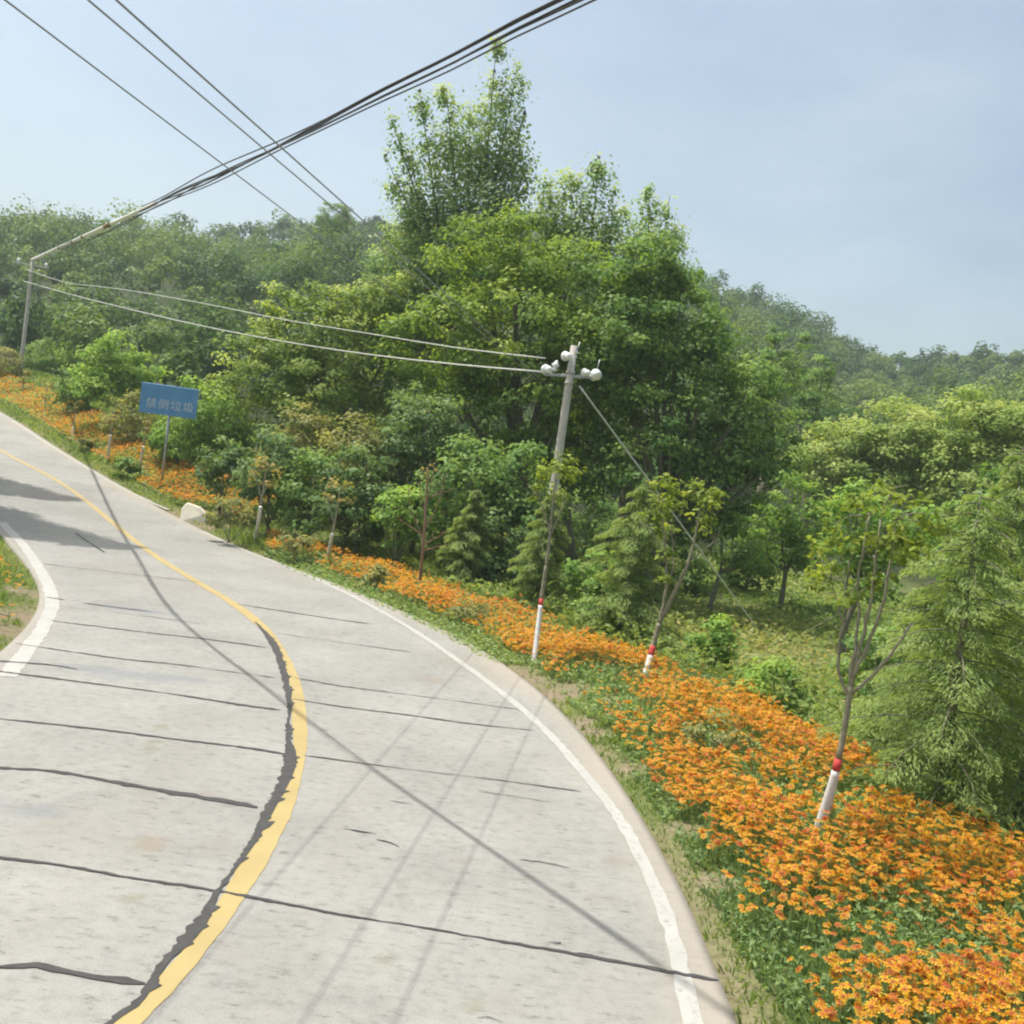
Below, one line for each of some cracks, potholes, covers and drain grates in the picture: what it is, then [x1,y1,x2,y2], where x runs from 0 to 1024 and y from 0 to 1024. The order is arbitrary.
crack [0,718,283,808]
crack [0,643,280,710]
